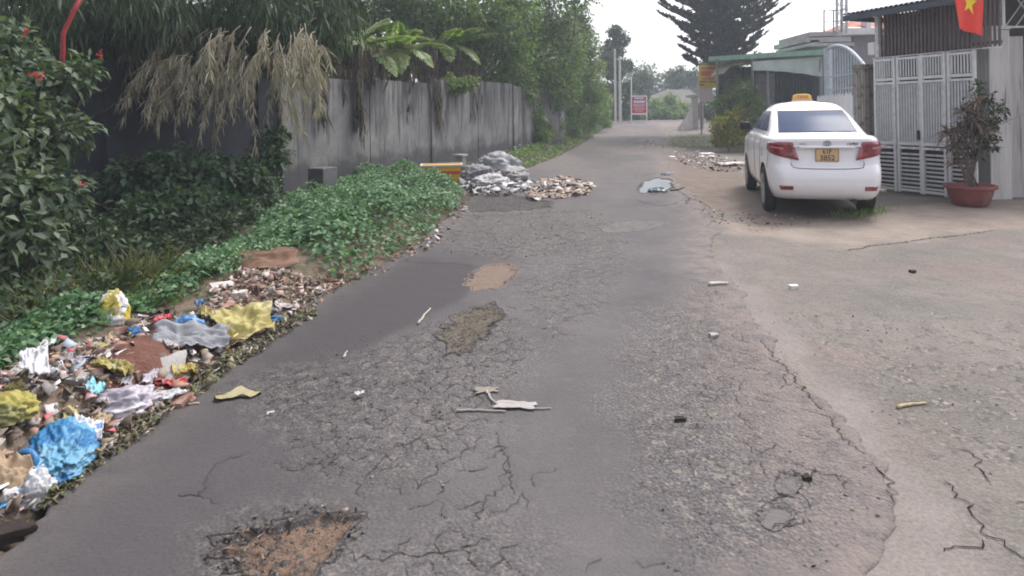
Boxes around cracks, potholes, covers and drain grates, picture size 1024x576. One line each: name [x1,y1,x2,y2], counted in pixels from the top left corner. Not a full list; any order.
crack [177,453,245,504]
pothole [636,177,676,195]
crack [681,333,899,528]
crack [944,447,1024,558]
crack [258,308,556,576]
pothole [432,301,507,357]
pothole [756,501,798,532]
pothole [774,468,804,498]
pothole [206,510,368,576]
